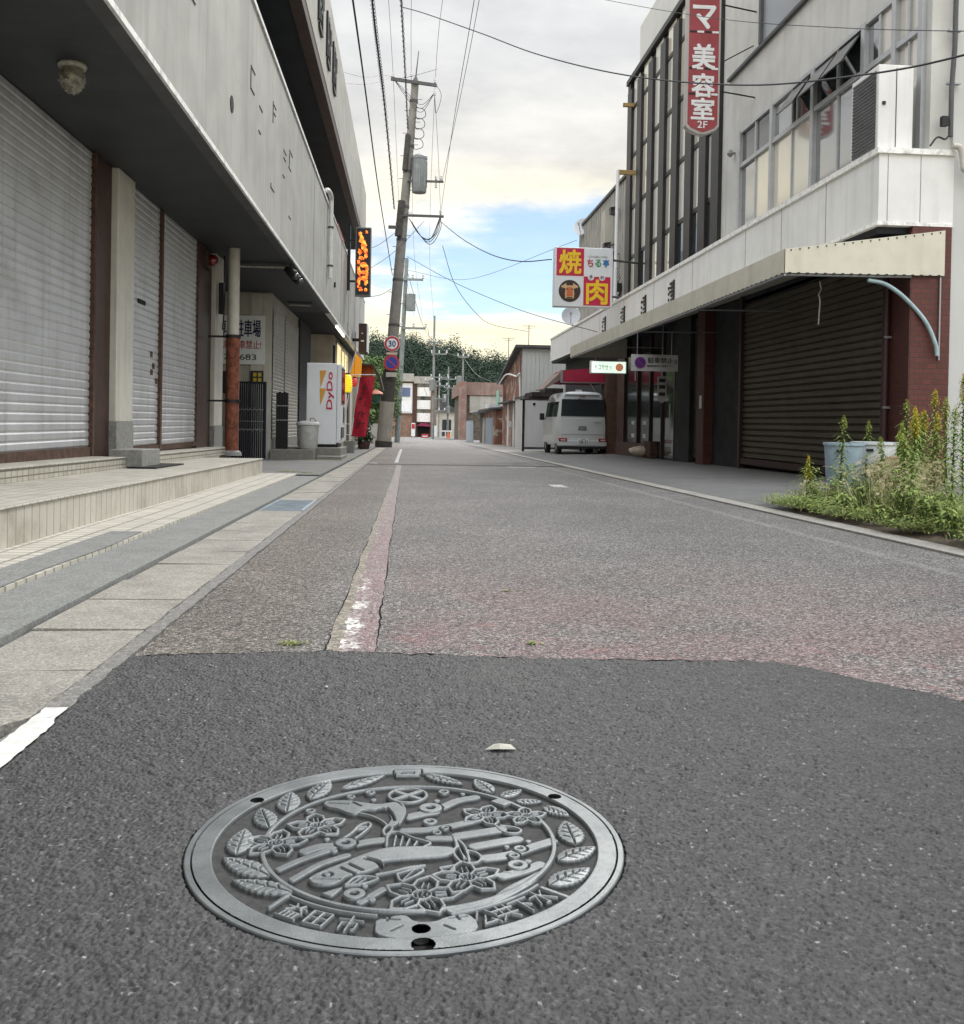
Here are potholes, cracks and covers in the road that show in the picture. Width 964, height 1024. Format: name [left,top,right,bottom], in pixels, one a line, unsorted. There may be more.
crack [324,488,399,651]
manhole cover [183,765,624,961]
drain grate [259,500,316,511]
